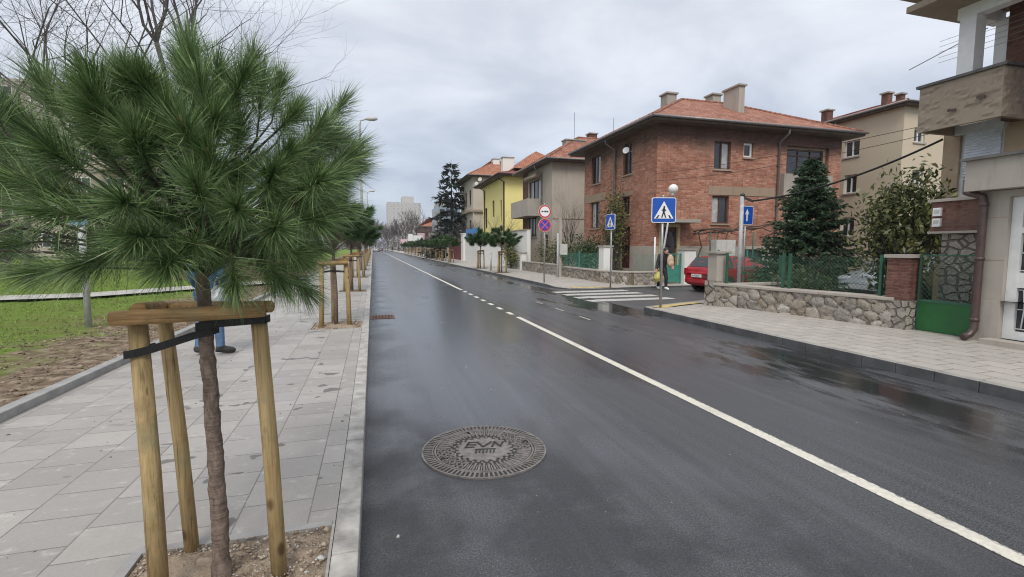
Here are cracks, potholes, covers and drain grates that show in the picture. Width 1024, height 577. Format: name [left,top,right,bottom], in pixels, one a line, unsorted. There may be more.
manhole cover [421,426,546,480]
